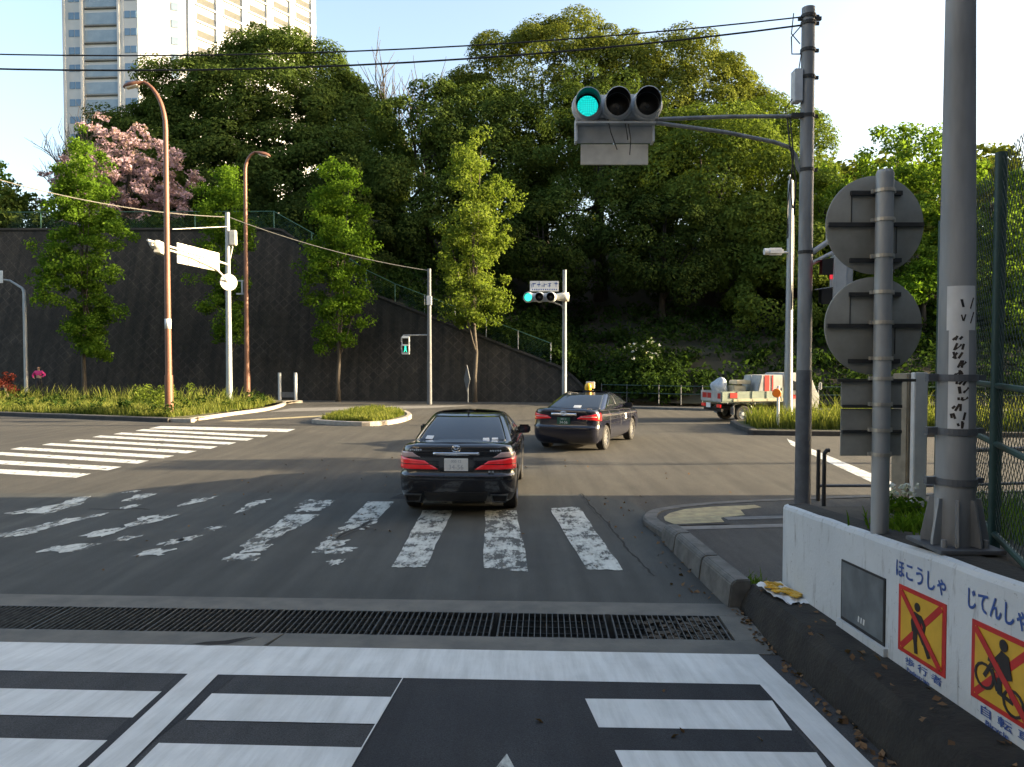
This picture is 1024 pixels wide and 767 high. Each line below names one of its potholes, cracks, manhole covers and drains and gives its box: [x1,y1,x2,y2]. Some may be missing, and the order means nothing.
drain grate [376,611,495,637]
drain grate [145,608,279,633]
drain grate [0,605,69,629]
drain grate [260,609,386,635]
drain grate [495,613,611,639]
drain grate [31,606,173,631]
drain grate [610,614,733,641]
crack [579,493,657,576]
